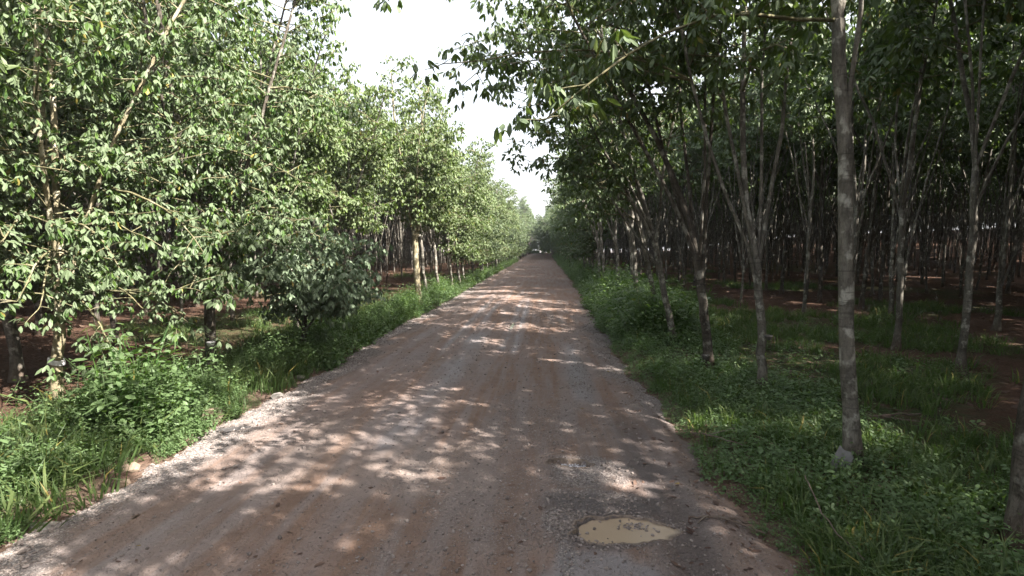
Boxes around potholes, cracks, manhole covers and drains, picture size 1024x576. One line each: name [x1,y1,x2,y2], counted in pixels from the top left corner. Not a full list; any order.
pothole [567,514,684,546]
